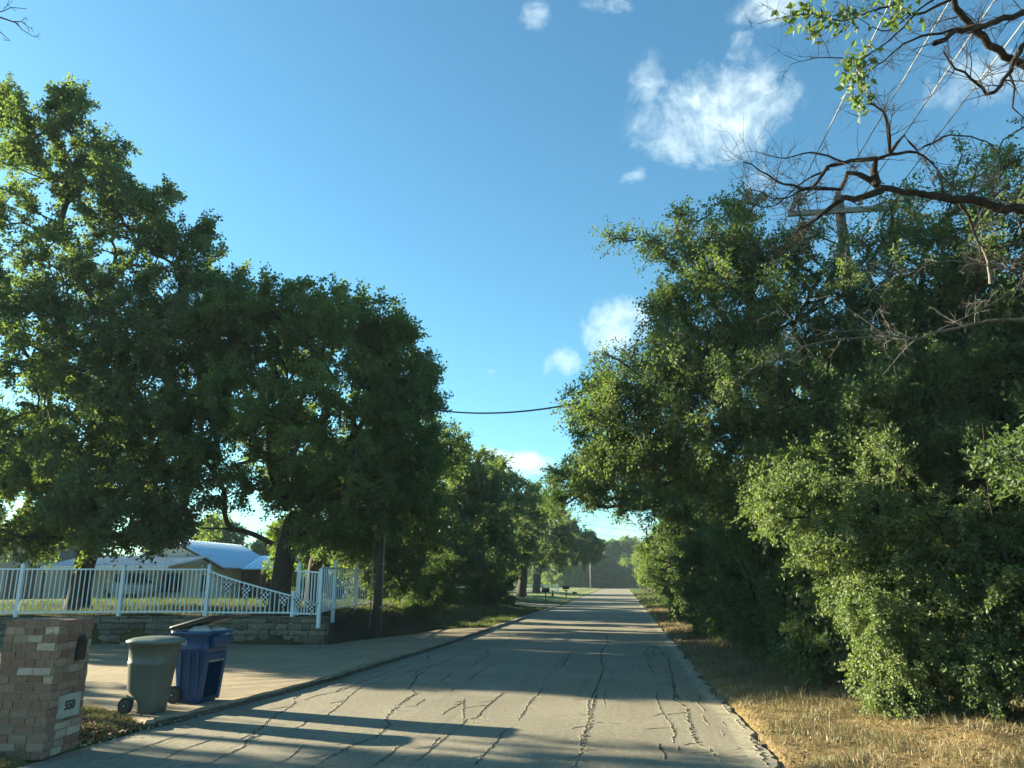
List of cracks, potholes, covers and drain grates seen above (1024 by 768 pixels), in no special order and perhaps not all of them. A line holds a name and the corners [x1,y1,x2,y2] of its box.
crack [641,645,770,767]
crack [98,633,620,768]
